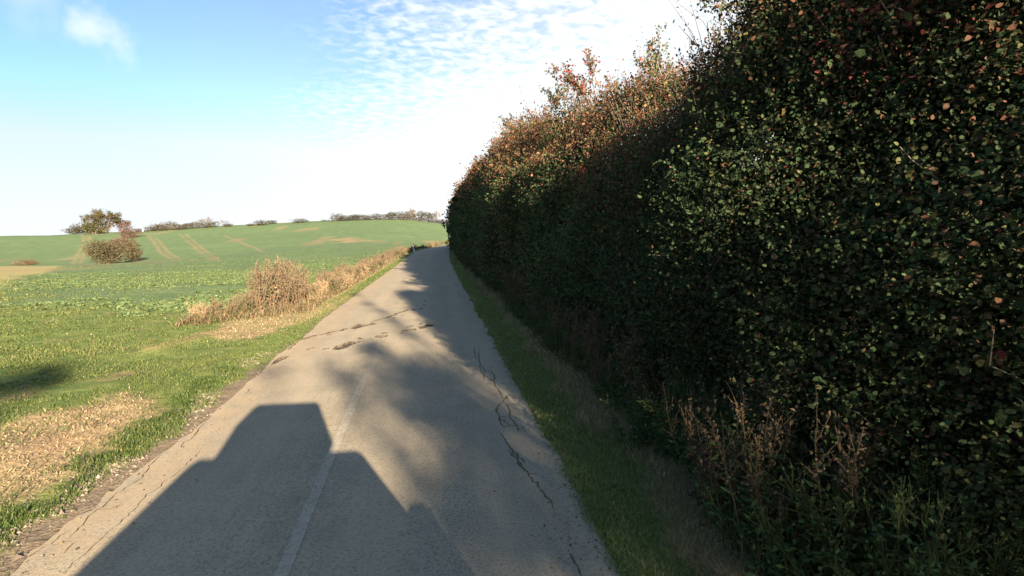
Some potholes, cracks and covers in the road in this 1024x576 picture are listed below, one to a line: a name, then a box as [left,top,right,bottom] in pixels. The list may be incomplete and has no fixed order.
pothole [333,341,356,350]
crack [473,347,555,510]
crack [570,553,582,576]
